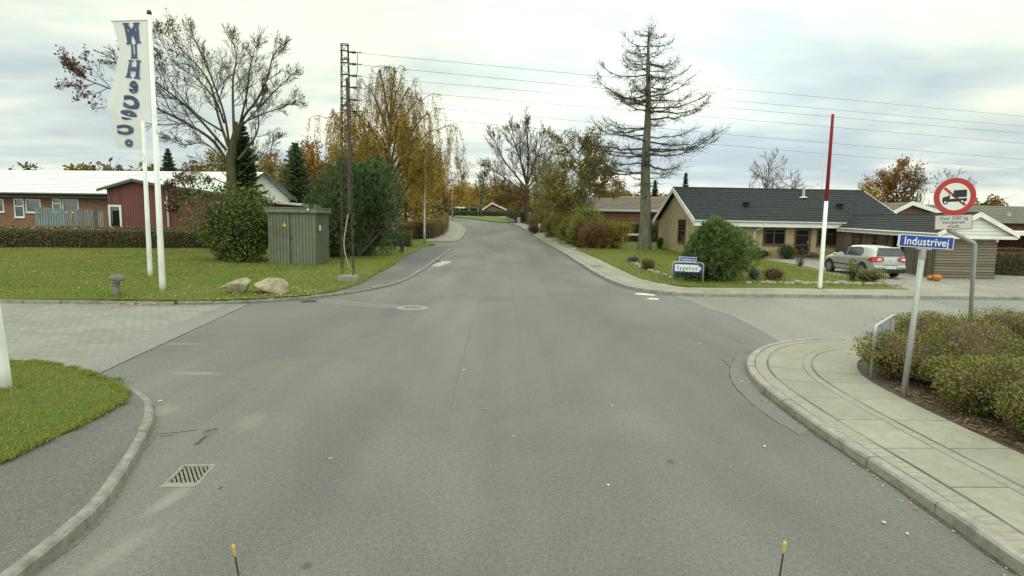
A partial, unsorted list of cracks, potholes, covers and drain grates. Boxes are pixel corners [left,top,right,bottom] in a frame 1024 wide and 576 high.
drain grate [163,464,216,485]
